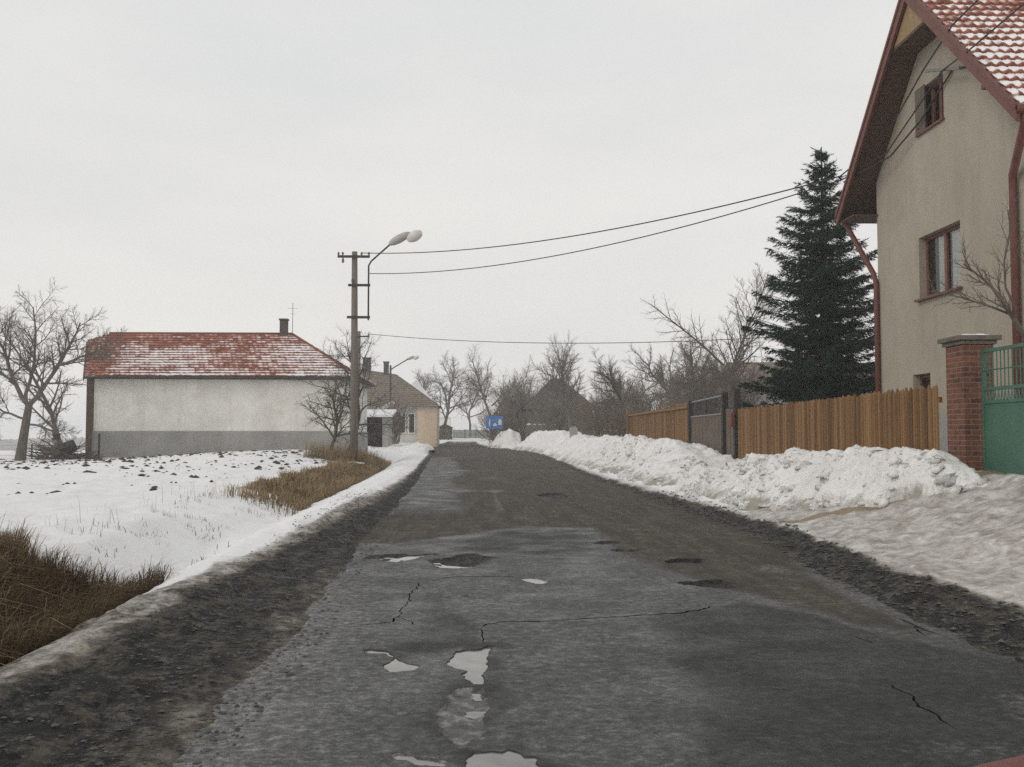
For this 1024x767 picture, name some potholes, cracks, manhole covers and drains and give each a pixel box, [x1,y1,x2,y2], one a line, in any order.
pothole [433,687,490,748]
pothole [362,649,420,672]
pothole [446,645,495,684]
crack [480,606,728,642]
crack [895,617,939,635]
pothole [363,553,438,562]
pothole [392,753,450,767]
crack [882,681,955,729]
pothole [427,553,497,568]
pothole [464,749,543,767]
crack [337,578,420,625]
pothole [677,579,735,589]
